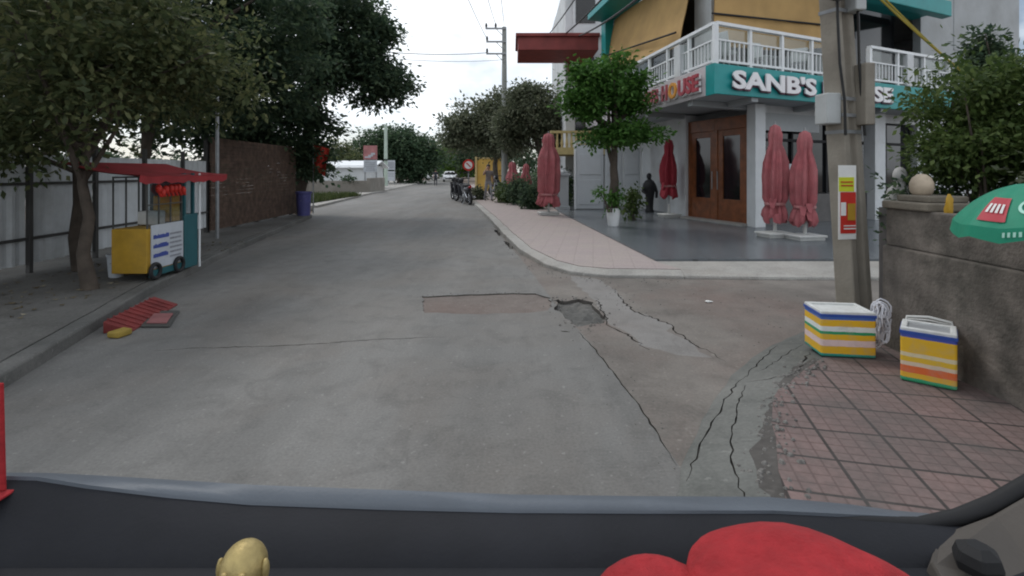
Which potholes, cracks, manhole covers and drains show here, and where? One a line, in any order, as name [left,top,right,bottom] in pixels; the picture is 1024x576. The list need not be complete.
crack [173,337,422,350]
pothole [554,299,605,327]
crack [562,292,811,497]
